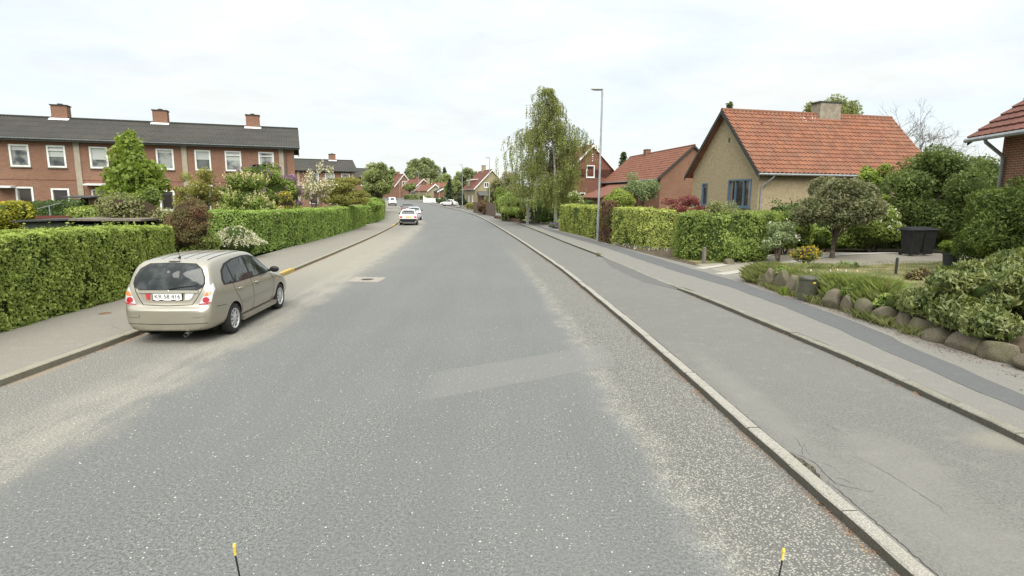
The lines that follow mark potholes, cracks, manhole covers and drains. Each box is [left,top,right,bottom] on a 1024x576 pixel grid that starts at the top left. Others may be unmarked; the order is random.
crack [785,441,939,576]
